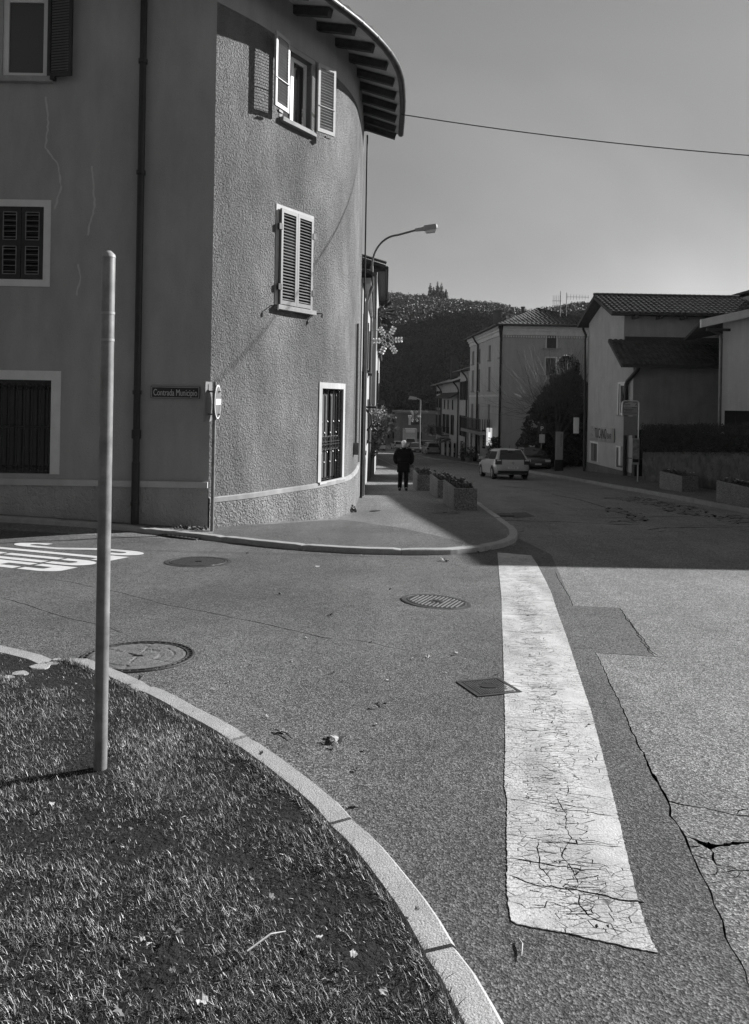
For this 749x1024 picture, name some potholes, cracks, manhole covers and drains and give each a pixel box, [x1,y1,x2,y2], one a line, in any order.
manhole cover [164,556,233,567]
manhole cover [80,641,195,673]
manhole cover [456,677,522,697]
